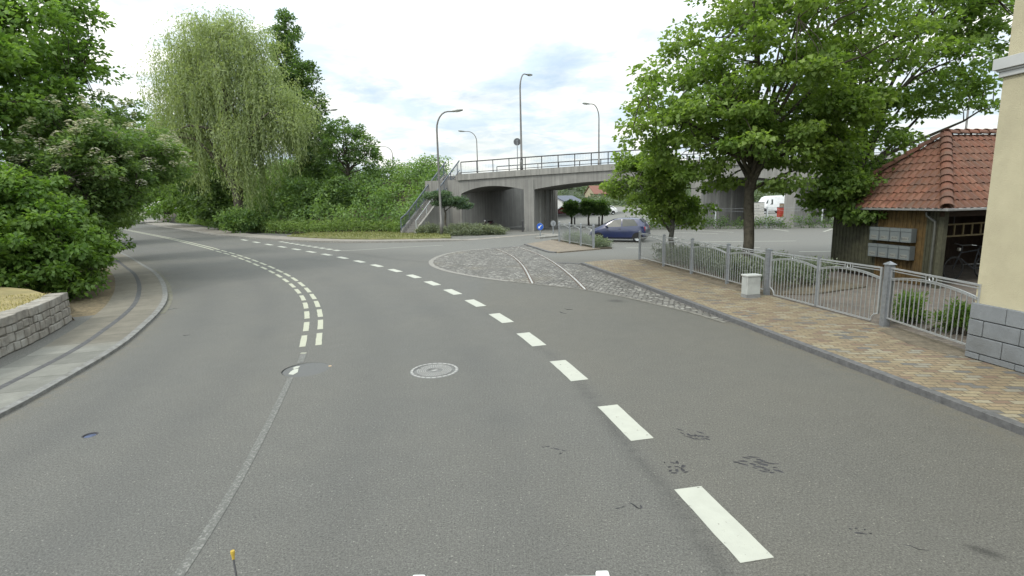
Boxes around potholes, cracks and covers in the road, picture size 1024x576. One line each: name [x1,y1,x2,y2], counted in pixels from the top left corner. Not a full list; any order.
manhole cover [281,362,332,377]
manhole cover [410,363,459,379]
